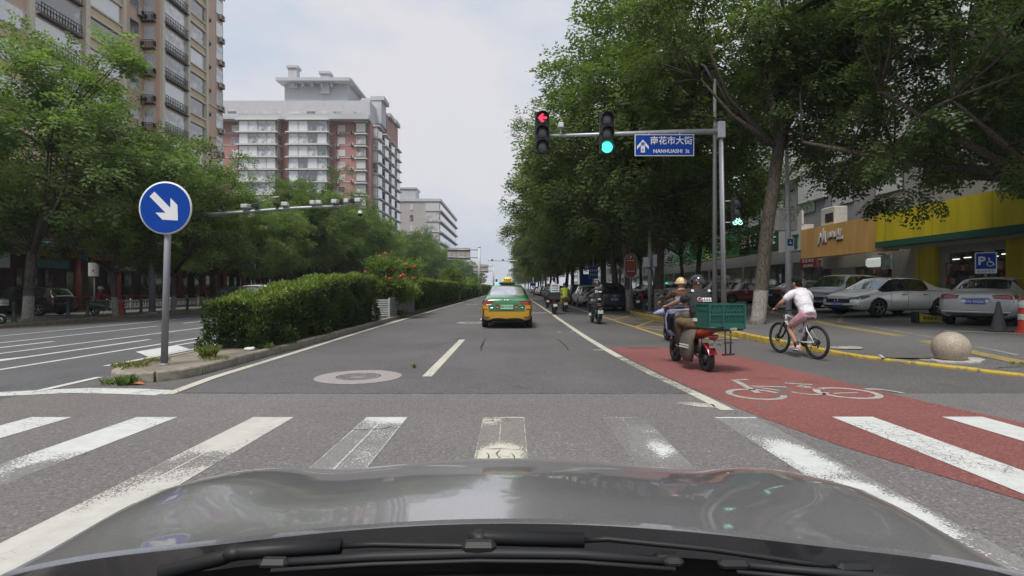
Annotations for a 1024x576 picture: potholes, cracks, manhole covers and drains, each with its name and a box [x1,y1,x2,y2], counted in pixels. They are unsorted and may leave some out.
manhole cover [314,370,402,384]
